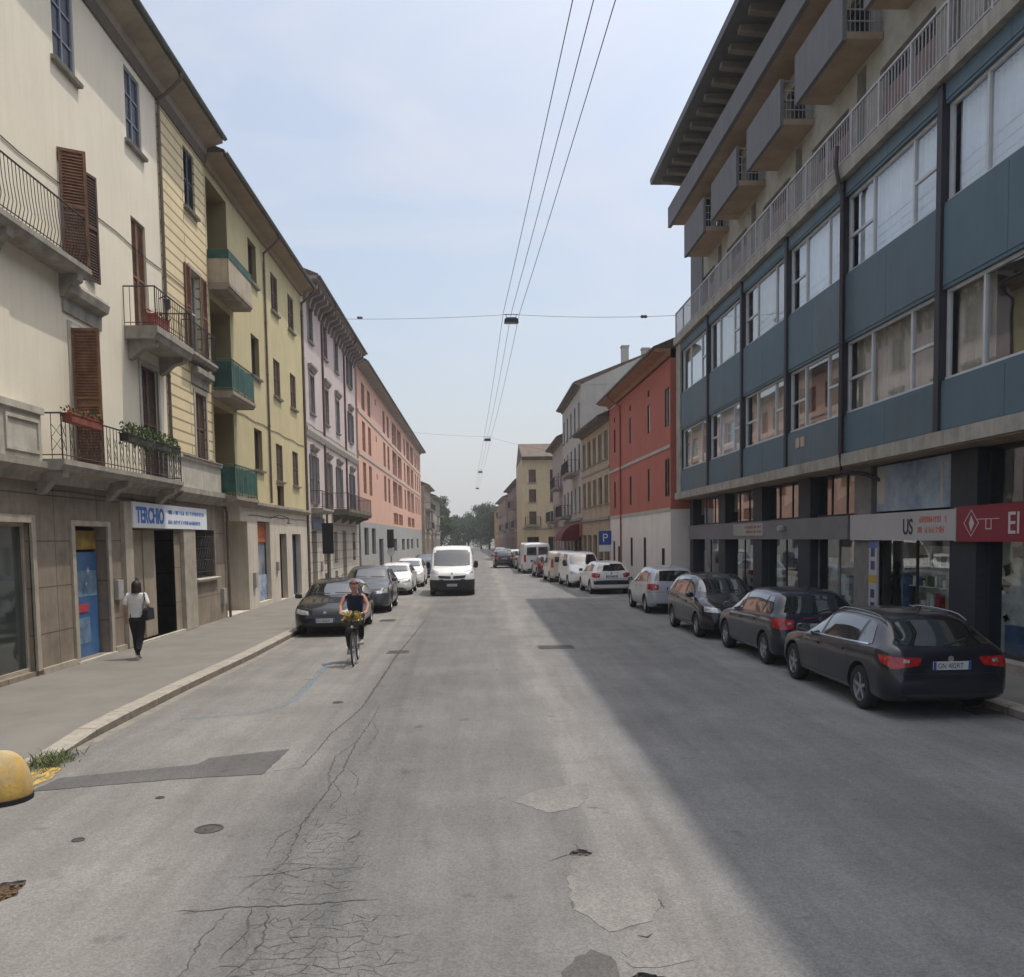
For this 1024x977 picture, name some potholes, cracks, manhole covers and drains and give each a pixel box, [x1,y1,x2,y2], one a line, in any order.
manhole cover [194,824,224,834]
crack [178,710,411,977]
pothole [0,880,26,901]
